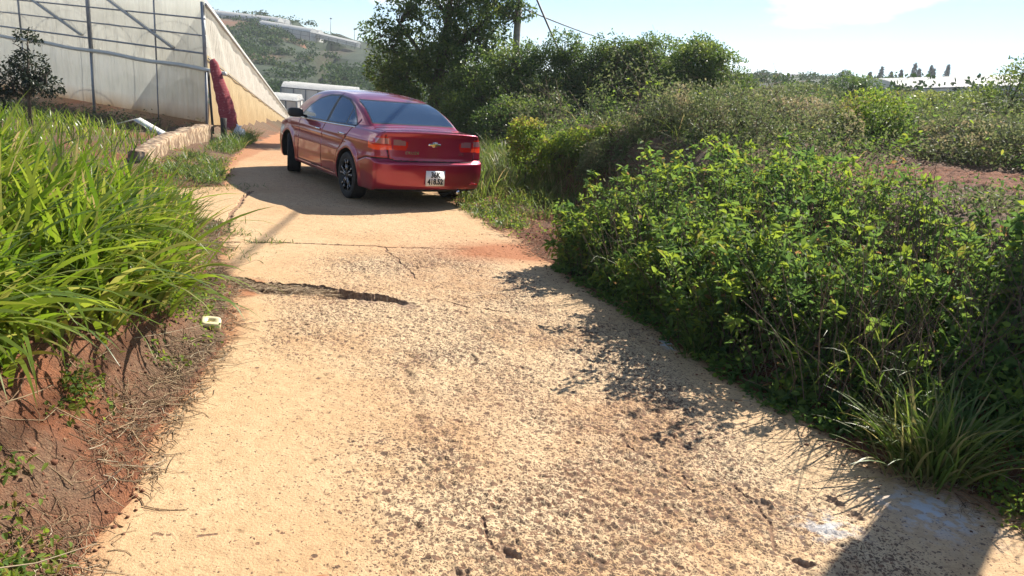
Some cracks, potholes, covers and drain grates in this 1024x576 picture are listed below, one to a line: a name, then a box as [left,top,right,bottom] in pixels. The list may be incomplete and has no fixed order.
crack [225,191,459,279]
crack [477,513,499,552]
